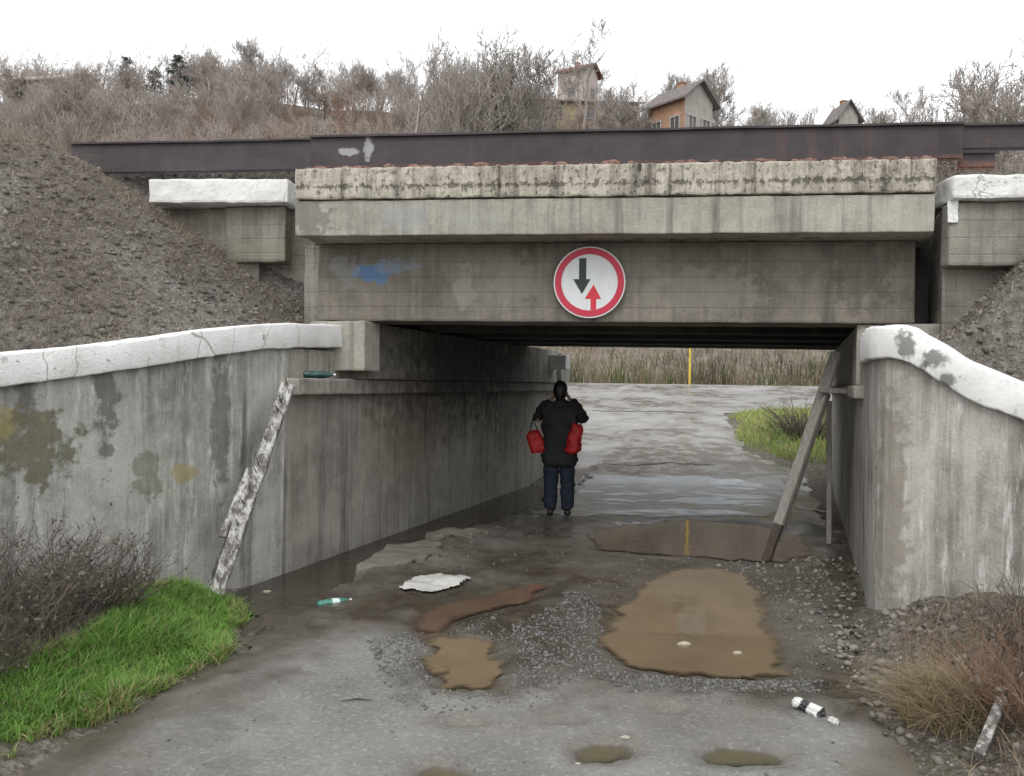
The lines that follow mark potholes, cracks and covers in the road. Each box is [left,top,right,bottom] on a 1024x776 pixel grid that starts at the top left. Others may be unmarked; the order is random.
pothole [412,629,522,698]
pothole [692,735,803,770]
pothole [561,732,652,765]
pothole [388,576,568,642]
pothole [576,518,827,564]
pothole [582,565,807,684]
